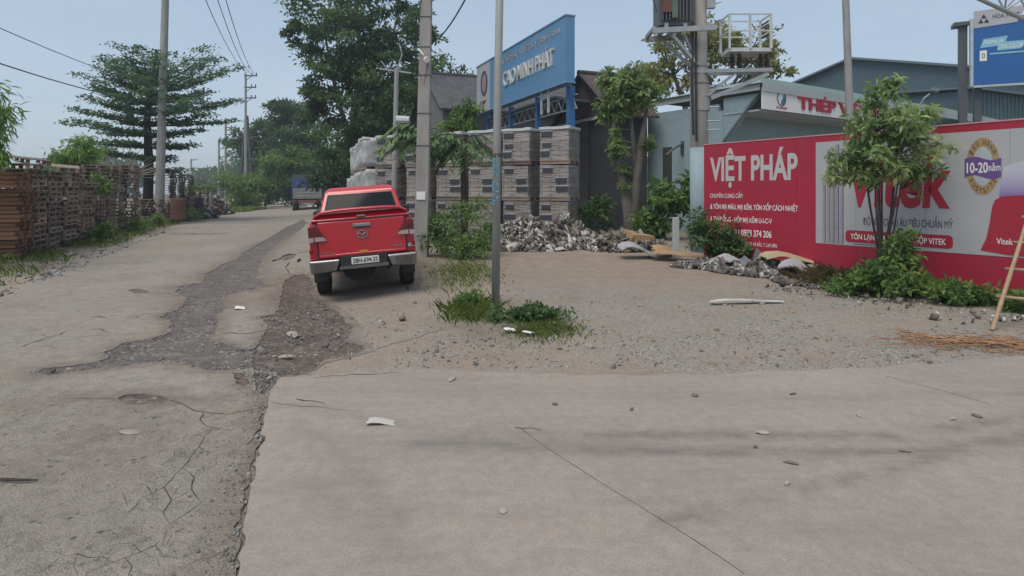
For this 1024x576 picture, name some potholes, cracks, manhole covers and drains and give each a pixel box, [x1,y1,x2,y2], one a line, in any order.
pothole [250,274,365,376]
crack [36,398,363,576]
pothole [232,372,249,386]
pothole [40,220,307,376]
pothole [253,372,277,394]
pothole [118,394,169,404]
